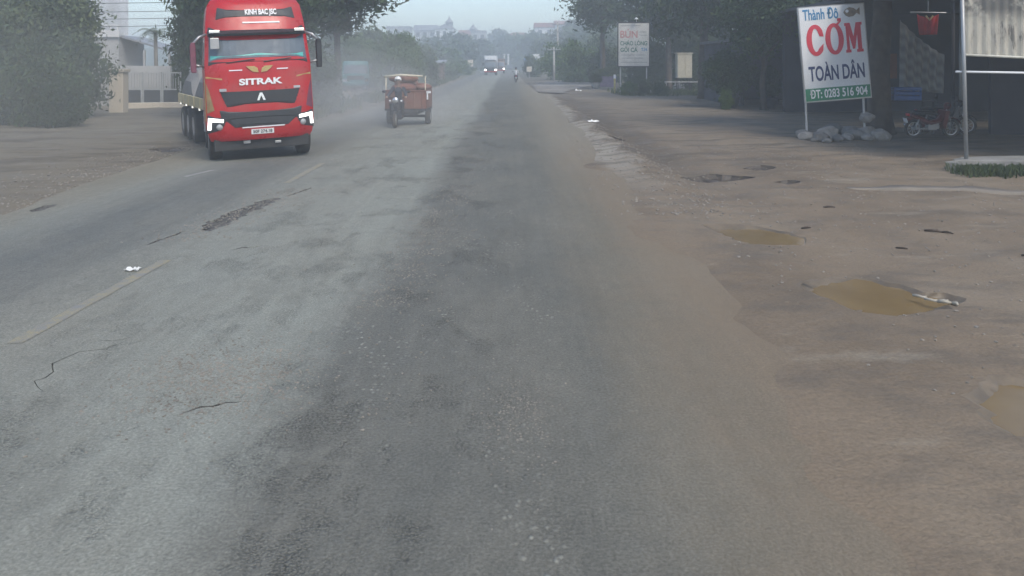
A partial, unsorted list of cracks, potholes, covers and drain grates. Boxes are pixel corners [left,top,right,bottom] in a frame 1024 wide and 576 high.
pothole [202,198,281,231]
crack [181,402,238,414]
pothole [680,174,755,183]
pothole [703,223,807,245]
pothole [798,278,967,316]
pothole [961,374,1024,437]
